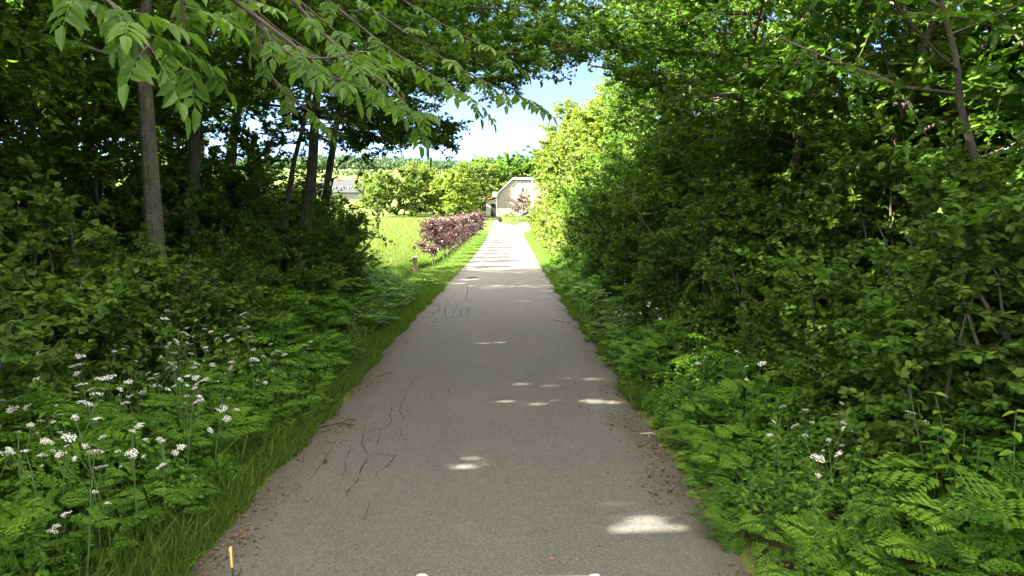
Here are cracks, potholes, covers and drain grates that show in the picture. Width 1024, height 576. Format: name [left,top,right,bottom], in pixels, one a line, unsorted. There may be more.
crack [428,286,469,322]
crack [308,378,416,521]
